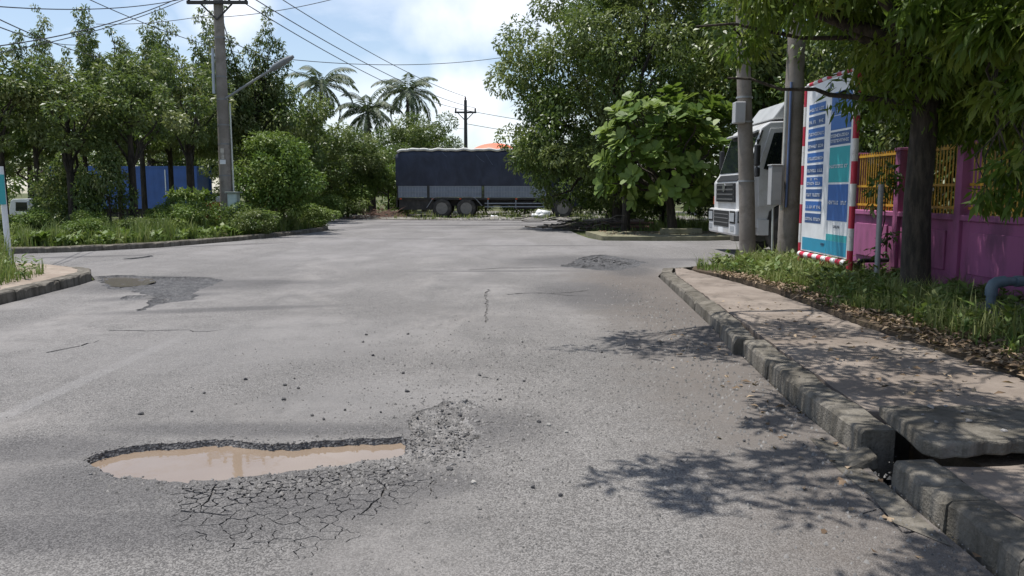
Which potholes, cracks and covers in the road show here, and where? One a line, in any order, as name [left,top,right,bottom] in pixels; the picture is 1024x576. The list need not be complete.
drain grate [880,424,909,488]
pothole [84,435,418,487]
crack [193,468,433,551]
